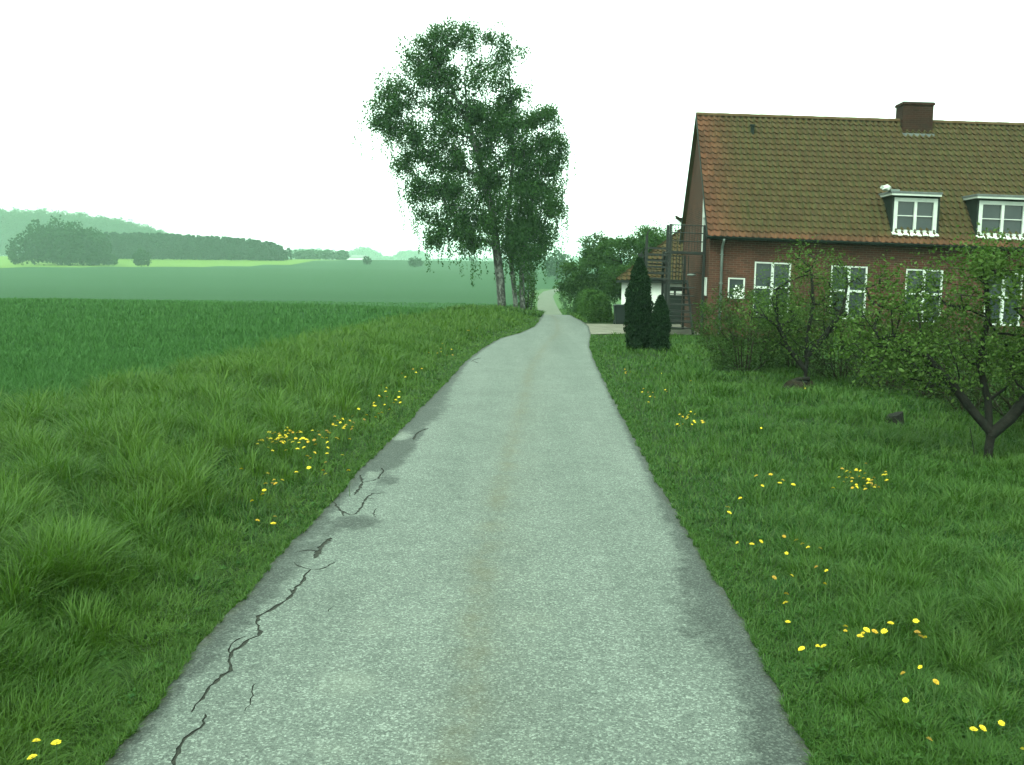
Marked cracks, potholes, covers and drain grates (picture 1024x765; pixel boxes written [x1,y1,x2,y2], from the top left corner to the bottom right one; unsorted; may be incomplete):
crack [171,538,331,765]
crack [335,469,384,516]
